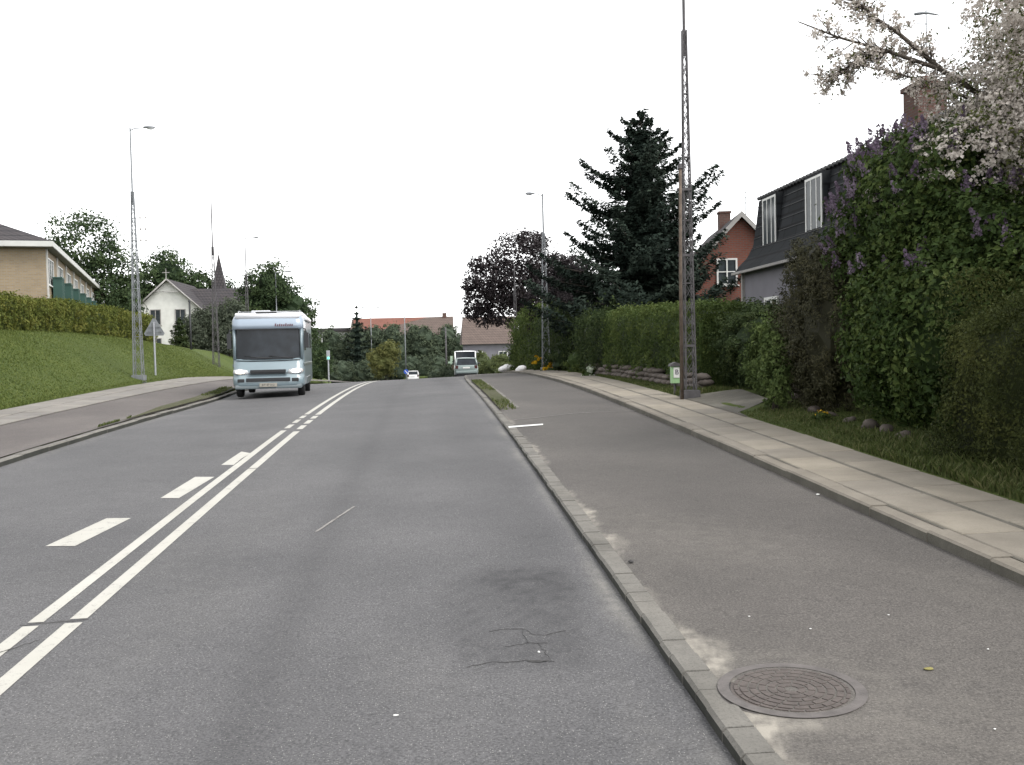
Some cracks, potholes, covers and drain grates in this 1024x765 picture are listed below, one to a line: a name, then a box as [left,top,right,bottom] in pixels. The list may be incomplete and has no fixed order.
crack [1,619,89,652]
manhole cover [717,663,868,718]
crack [468,629,565,667]
